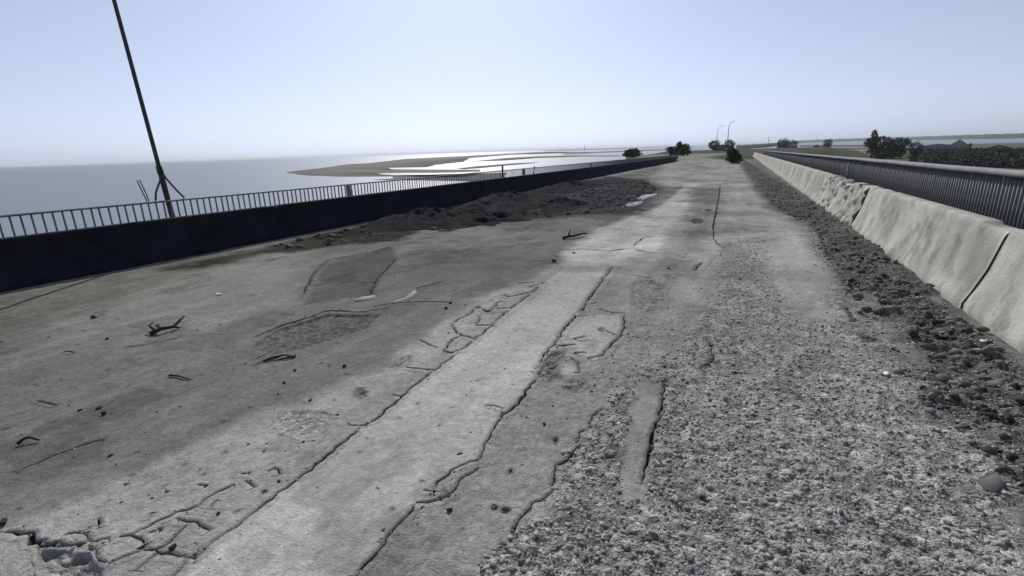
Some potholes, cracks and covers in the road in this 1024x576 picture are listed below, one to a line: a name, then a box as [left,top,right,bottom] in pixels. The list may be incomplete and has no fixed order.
crack [0,465,287,571]
crack [251,236,675,576]
crack [674,184,726,271]
